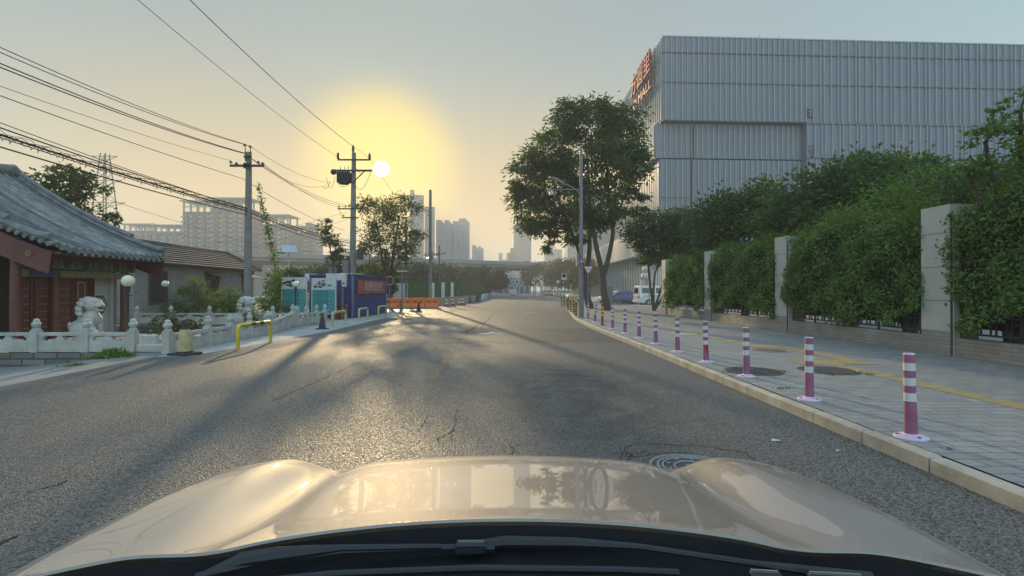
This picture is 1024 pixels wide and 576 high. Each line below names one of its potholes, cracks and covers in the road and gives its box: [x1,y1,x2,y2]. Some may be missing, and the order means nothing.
manhole cover [797,366,862,375]
manhole cover [649,454,710,469]
crack [617,443,755,461]
manhole cover [724,367,784,376]
